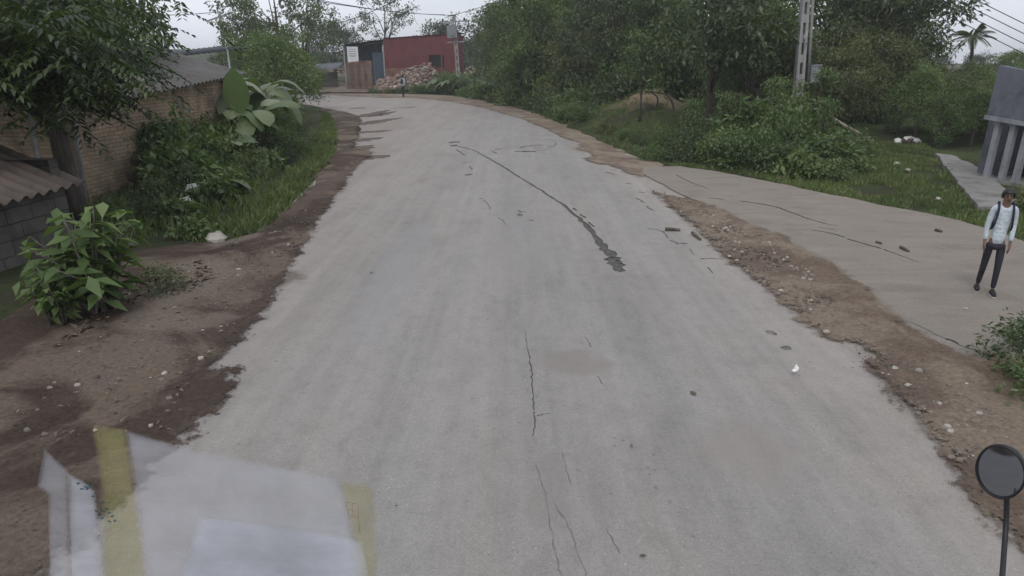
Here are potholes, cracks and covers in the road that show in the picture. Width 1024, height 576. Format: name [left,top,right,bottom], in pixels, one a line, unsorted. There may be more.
crack [525,333,549,435]
crack [677,175,920,263]
crack [450,142,654,272]
